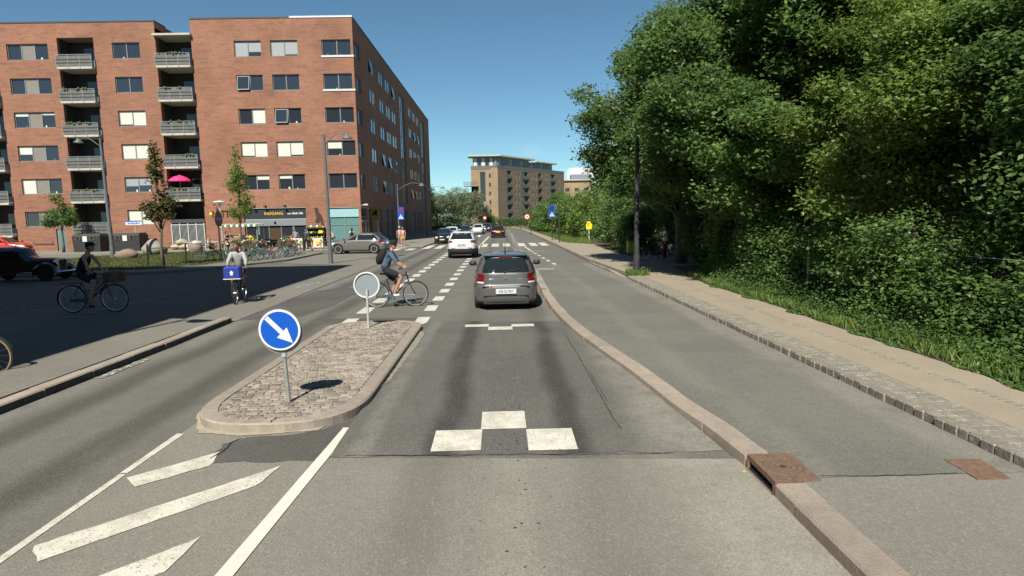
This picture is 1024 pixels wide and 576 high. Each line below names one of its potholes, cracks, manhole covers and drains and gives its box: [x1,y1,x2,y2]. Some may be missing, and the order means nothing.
crack [566,336,622,429]
